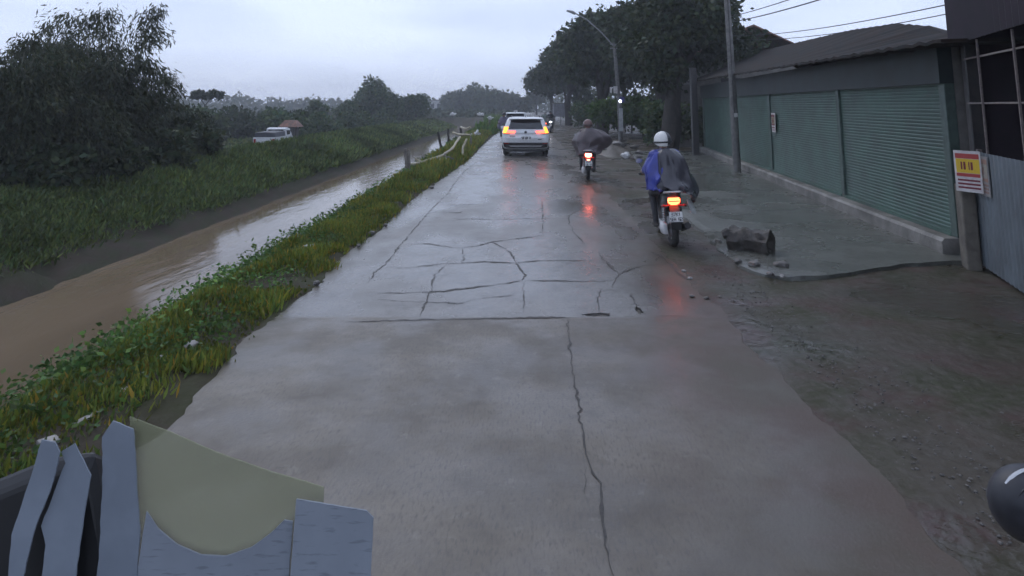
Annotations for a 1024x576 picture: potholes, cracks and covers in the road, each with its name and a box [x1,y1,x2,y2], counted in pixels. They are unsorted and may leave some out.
crack [350,161,688,576]
